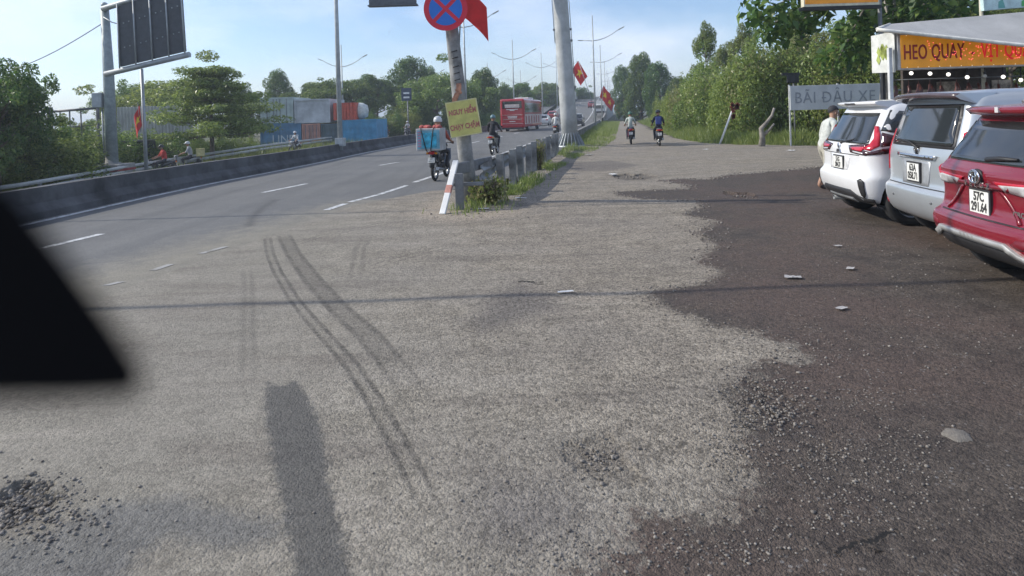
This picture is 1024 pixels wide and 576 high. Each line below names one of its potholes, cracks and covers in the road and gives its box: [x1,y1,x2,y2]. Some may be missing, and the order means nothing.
pothole [0,471,79,535]
pothole [609,173,661,181]
pothole [721,190,760,199]
pothole [709,371,850,469]
pothole [549,428,654,491]
